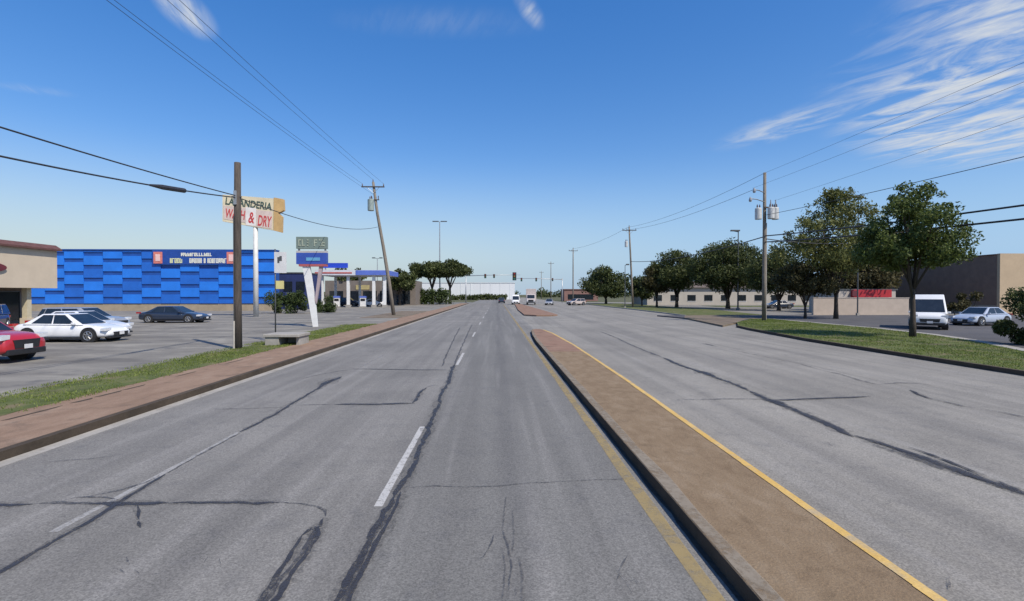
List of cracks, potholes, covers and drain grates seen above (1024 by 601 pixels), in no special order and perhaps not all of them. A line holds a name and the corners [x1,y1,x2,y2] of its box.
crack [429,479,616,596]
